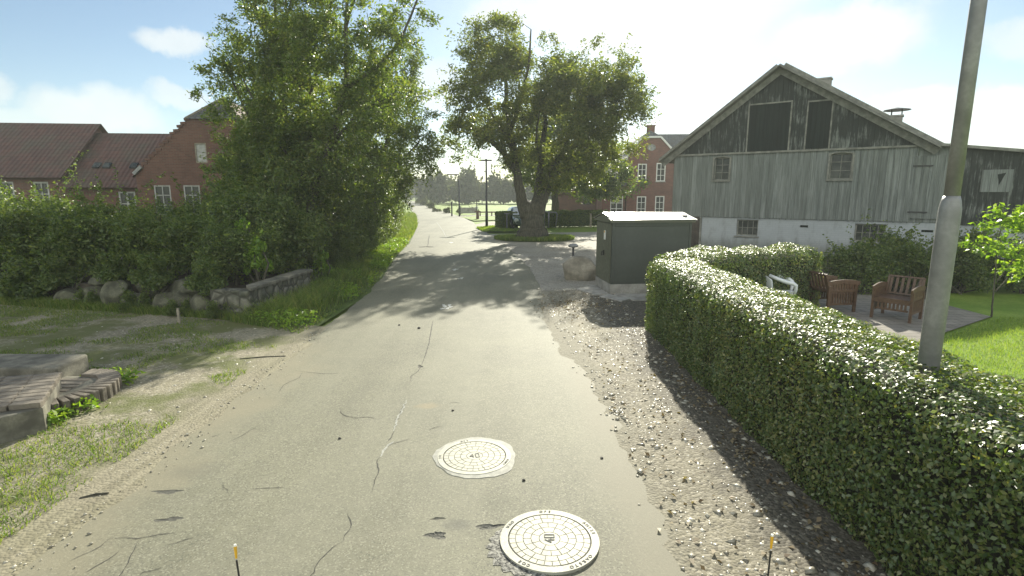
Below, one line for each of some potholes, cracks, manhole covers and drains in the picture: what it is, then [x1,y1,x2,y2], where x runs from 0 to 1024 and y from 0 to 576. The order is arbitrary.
crack [74,532,193,576]
manhole cover [432,437,515,479]
manhole cover [500,510,600,575]
crack [373,400,411,486]
